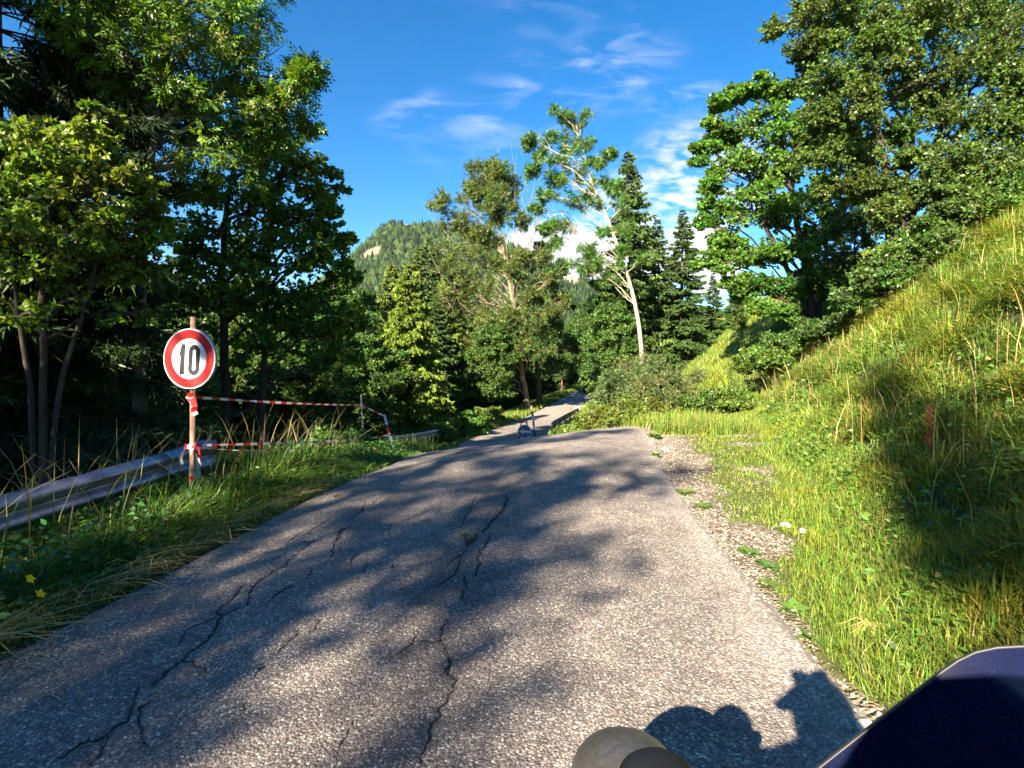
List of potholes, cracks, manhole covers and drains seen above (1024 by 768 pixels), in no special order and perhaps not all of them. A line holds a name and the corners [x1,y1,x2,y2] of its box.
crack [436,494,508,599]
crack [53,498,382,766]
crack [400,620,457,763]
